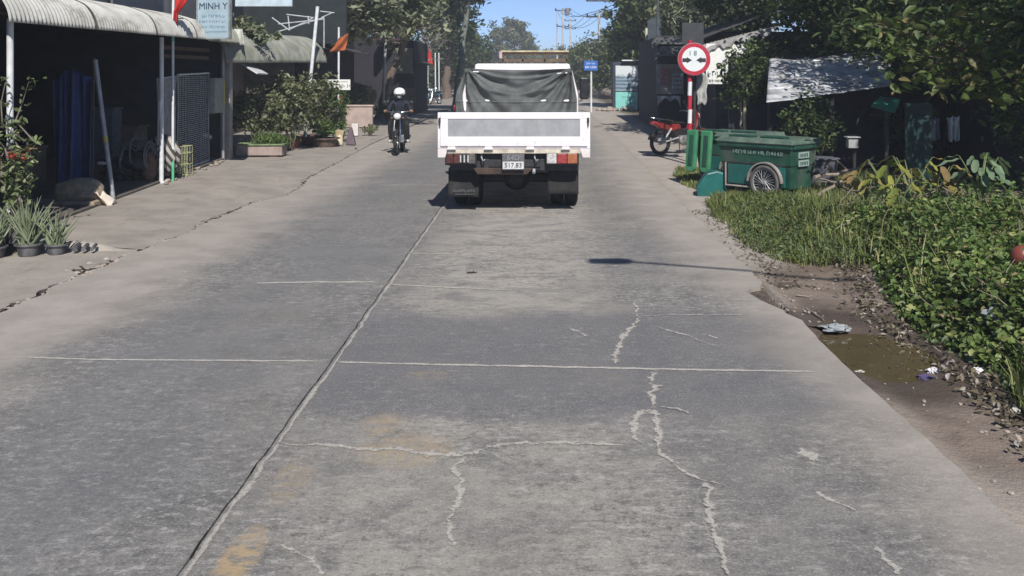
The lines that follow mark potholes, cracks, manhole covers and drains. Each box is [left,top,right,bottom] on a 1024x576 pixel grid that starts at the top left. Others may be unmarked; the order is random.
crack [873,546,903,574]
crack [797,448,820,461]
crack [0,266,88,312]
crack [143,144,371,250]
crack [286,302,741,574]
crack [816,491,855,510]
